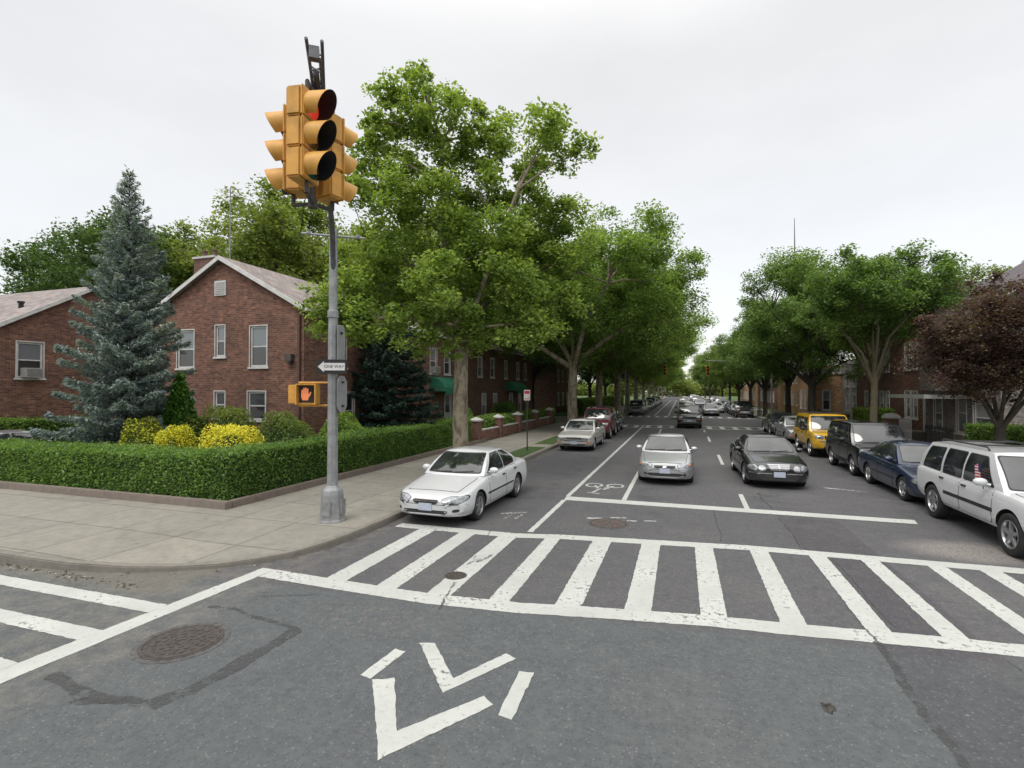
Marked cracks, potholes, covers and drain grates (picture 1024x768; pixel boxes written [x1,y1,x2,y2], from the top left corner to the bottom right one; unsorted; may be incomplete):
manhole cover [444,571,467,580]
manhole cover [130,622,231,664]
pothole [819,702,836,714]
manhole cover [587,518,630,529]
